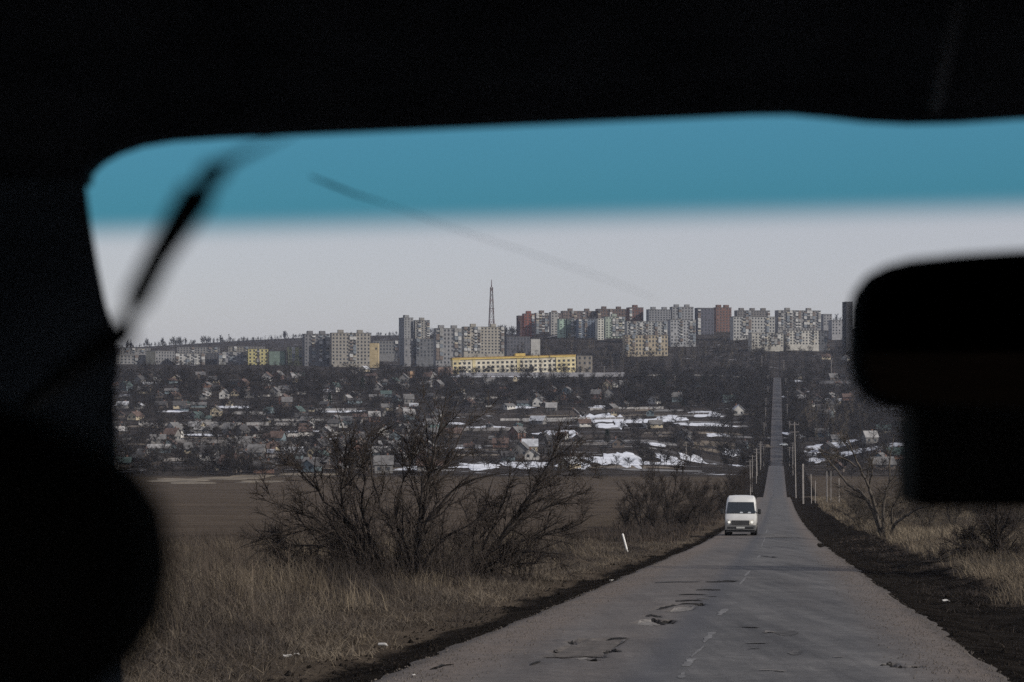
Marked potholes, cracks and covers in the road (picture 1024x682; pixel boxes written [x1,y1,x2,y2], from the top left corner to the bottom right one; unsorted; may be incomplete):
pothole [553,638,628,658]
